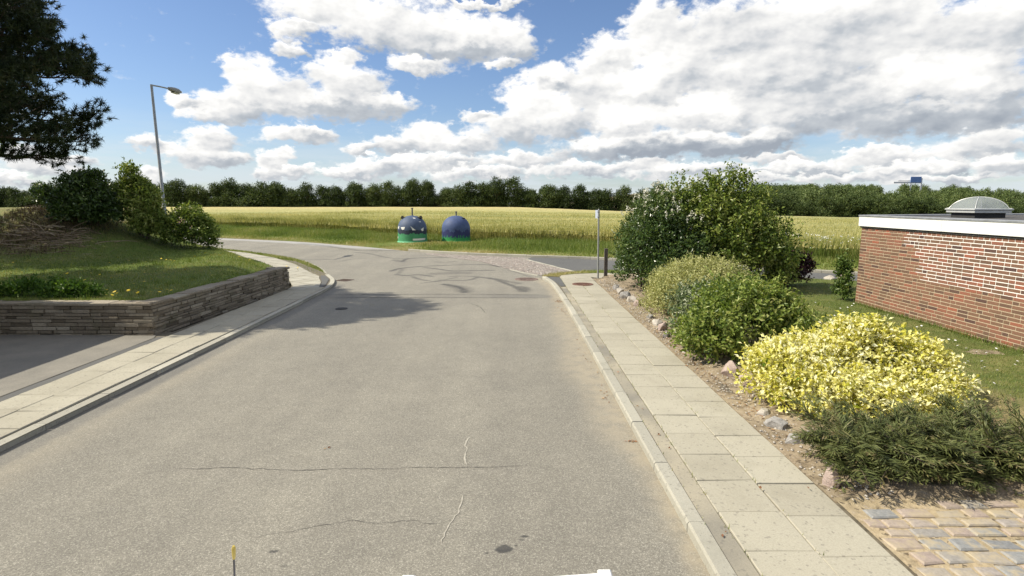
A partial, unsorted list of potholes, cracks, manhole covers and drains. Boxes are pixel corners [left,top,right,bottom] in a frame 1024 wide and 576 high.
crack [183,436,523,471]
crack [253,496,463,543]
